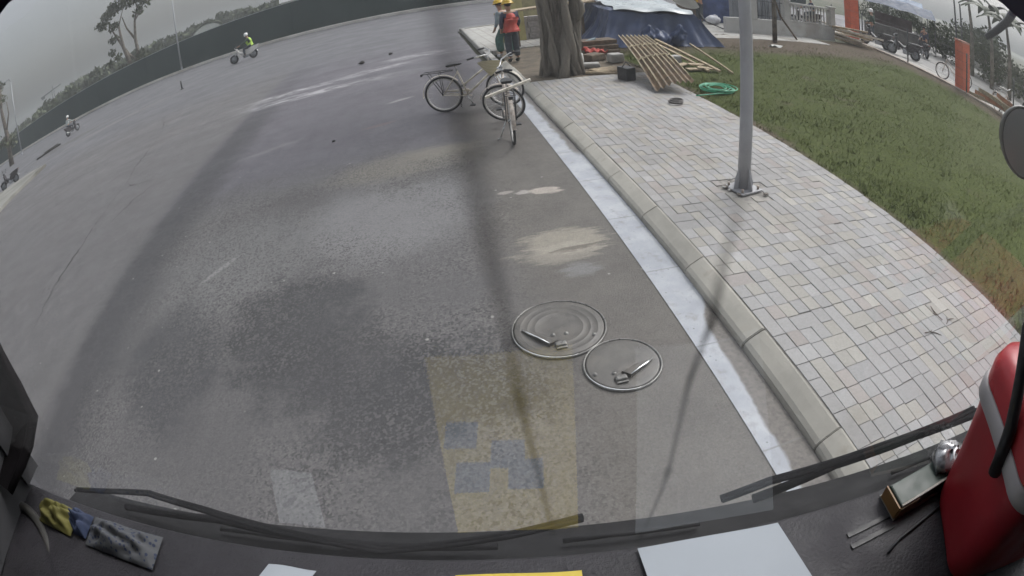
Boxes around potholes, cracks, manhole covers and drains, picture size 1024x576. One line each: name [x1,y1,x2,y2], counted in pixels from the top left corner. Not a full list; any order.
crack [37,123,164,321]
manhole cover [511,300,607,360]
manhole cover [583,338,663,392]
